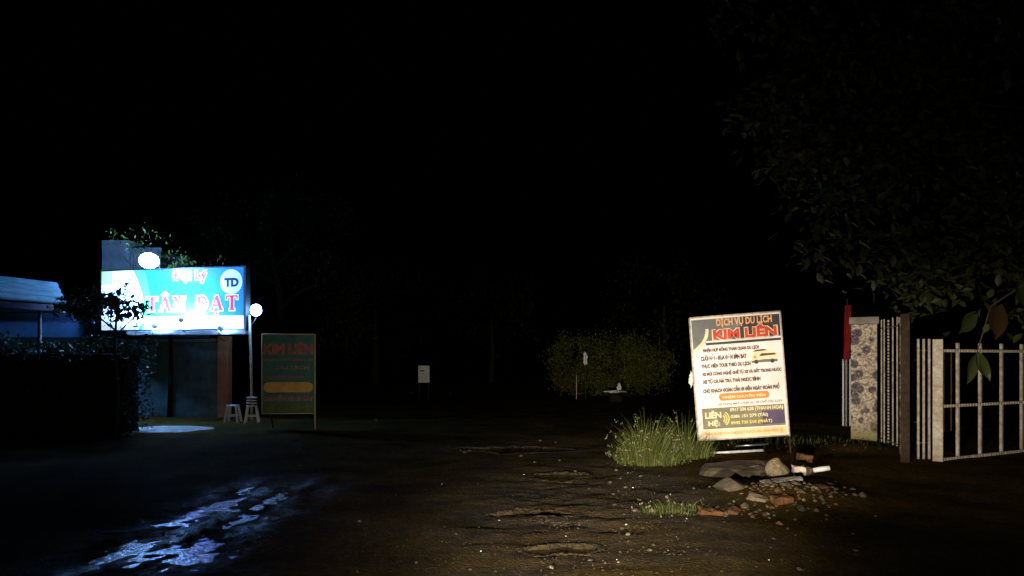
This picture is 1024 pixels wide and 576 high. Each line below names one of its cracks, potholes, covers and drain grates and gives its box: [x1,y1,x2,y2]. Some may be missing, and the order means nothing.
pothole [478,507,588,519]
pothole [521,471,595,483]
pothole [514,543,606,557]
pothole [438,445,589,455]
